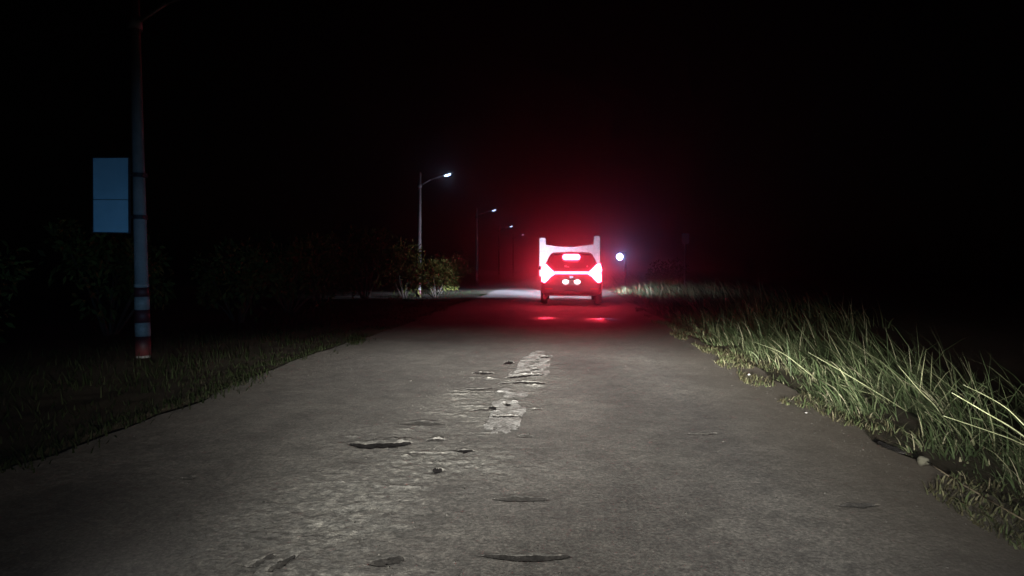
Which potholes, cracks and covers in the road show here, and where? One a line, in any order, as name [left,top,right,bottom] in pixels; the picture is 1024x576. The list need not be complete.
pothole [370,556,404,567]
